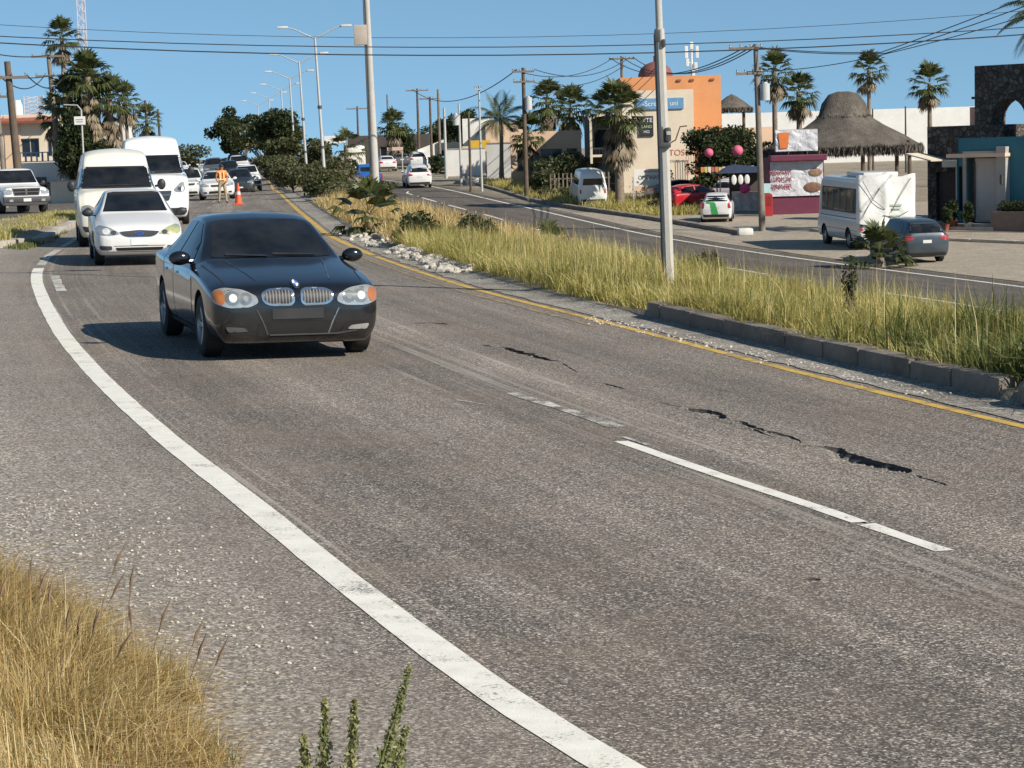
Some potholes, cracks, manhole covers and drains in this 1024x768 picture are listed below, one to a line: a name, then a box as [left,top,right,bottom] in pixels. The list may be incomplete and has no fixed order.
pothole [791,444,917,473]
crack [659,401,801,443]
crack [480,344,578,373]
